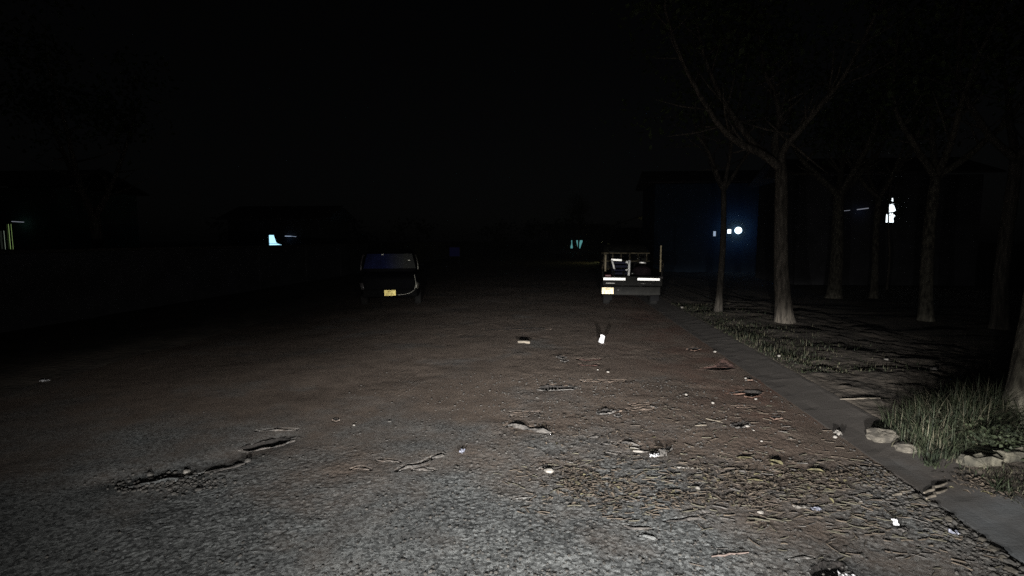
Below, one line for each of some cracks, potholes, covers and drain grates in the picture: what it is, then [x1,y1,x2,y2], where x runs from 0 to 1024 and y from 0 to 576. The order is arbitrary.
crack [351,453,444,471]
pothole [237,437,296,453]
pothole [728,390,764,398]
pothole [806,561,850,576]
